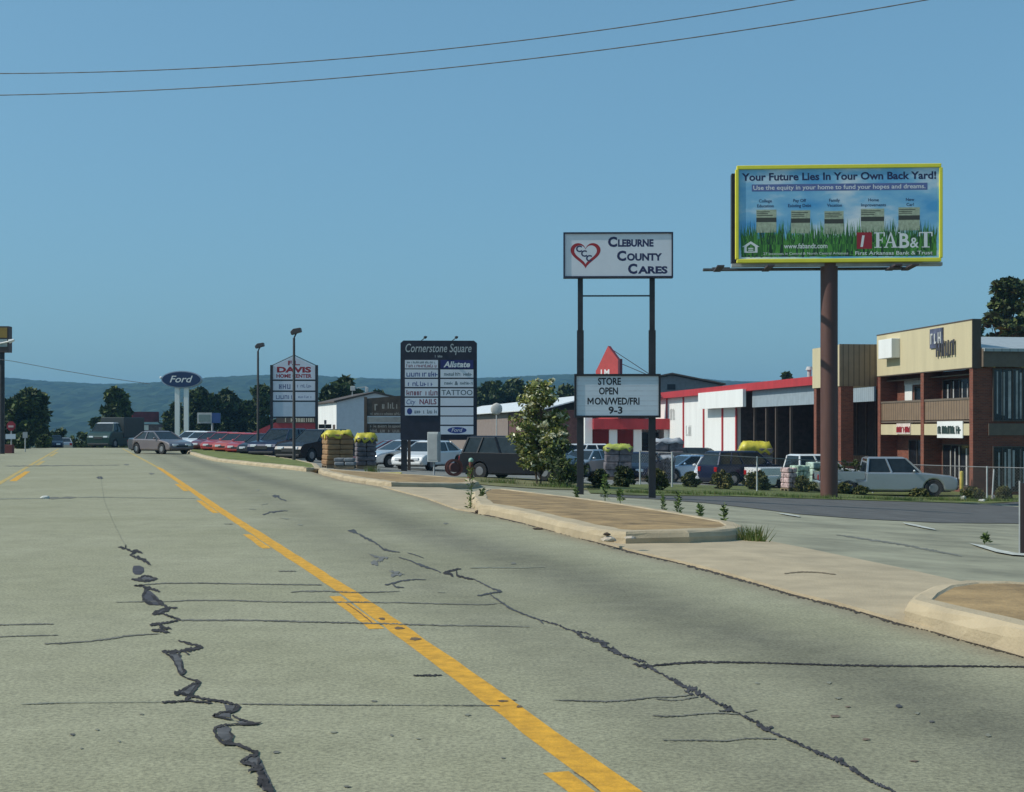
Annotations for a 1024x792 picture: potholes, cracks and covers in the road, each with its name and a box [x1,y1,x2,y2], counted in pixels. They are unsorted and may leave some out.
crack [0,455,1024,792]
